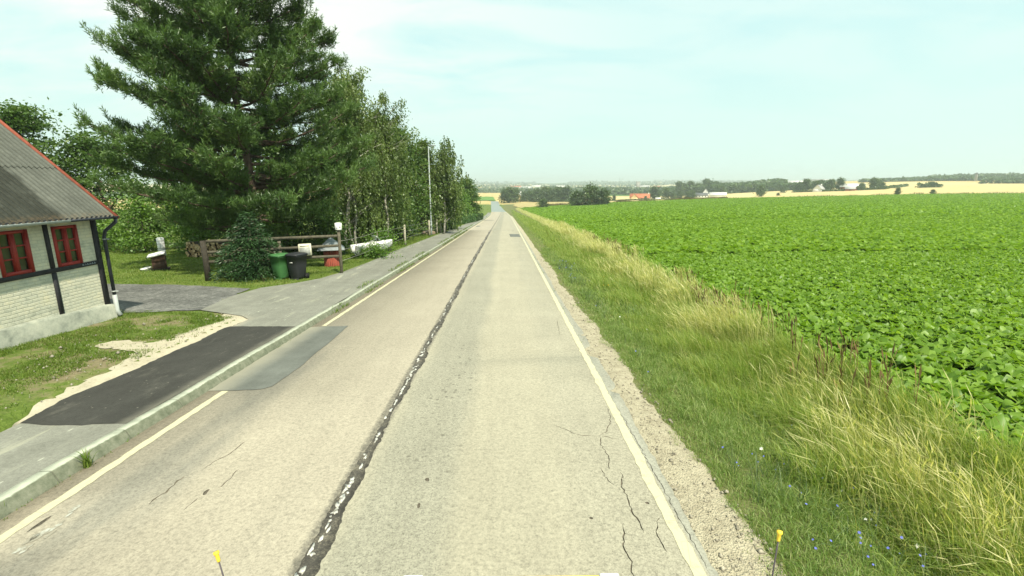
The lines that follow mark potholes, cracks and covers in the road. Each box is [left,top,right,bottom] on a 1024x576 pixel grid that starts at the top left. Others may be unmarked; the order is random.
crack [555,408,710,576]
crack [150,477,198,510]
